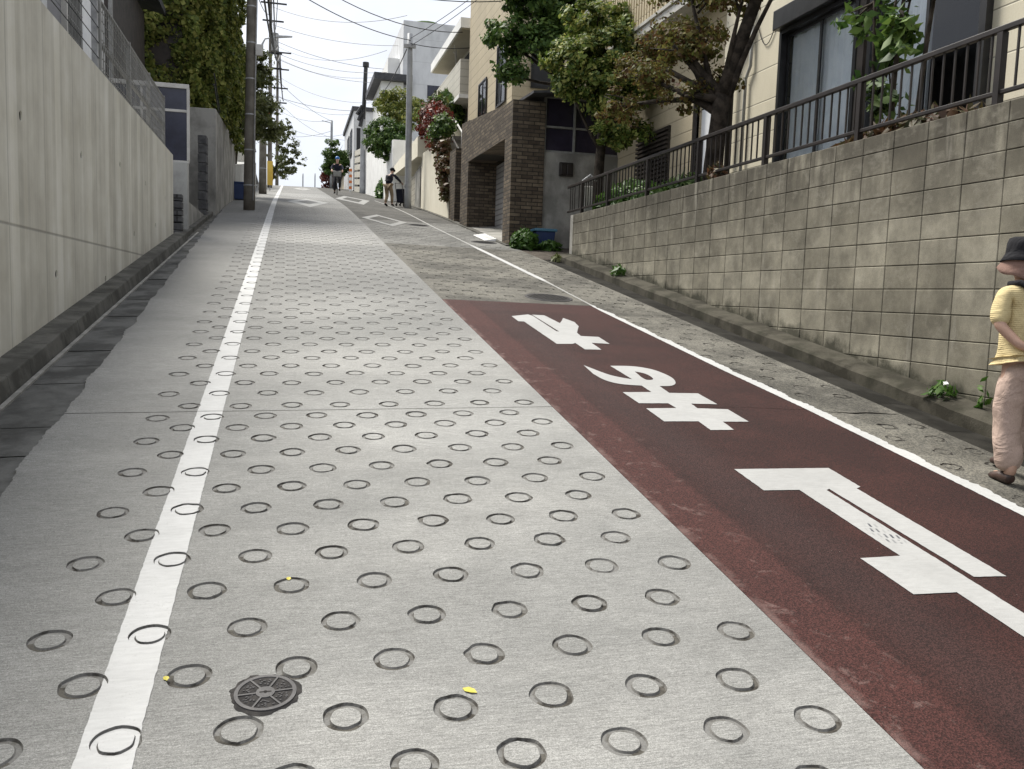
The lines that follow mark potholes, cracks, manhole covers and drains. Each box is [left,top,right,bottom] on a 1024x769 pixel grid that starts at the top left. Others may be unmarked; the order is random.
manhole cover [525,293,572,302]
manhole cover [229,674,302,716]
